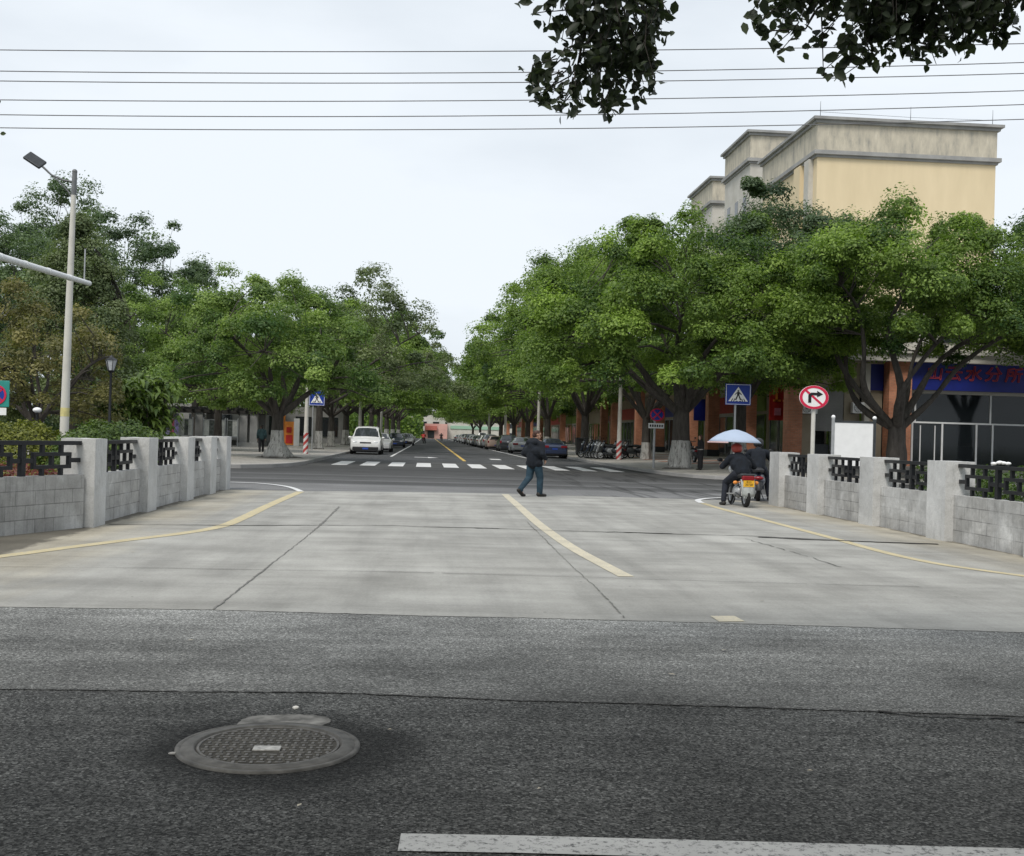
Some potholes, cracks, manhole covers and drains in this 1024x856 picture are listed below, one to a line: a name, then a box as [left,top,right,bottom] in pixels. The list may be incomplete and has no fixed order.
manhole cover [174,722,360,774]
